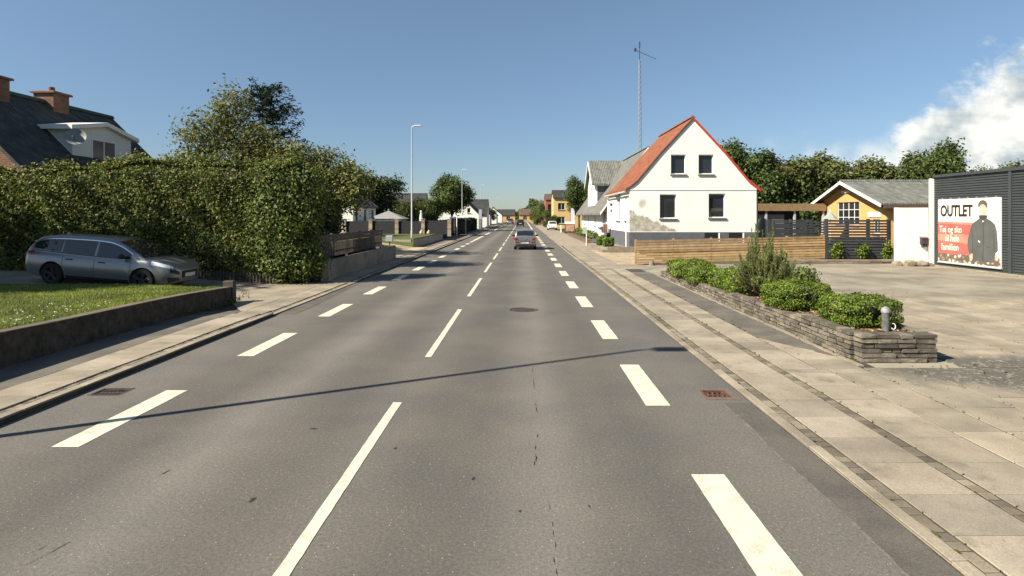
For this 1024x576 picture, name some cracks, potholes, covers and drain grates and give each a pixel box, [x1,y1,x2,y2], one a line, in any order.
drain grate [87,388,135,396]
